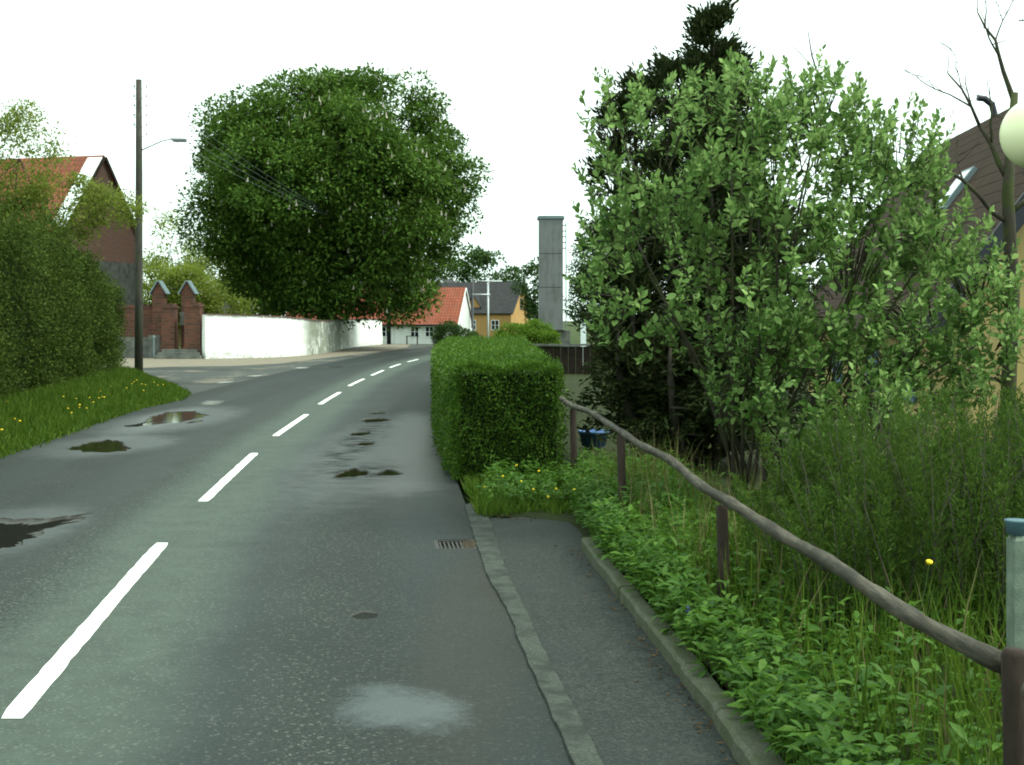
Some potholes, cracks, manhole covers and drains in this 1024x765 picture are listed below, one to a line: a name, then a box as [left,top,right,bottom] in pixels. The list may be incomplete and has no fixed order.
pothole [124,411,208,427]
pothole [351,610,381,619]
drain grate [434,539,477,549]
pothole [334,468,371,478]
pothole [0,512,96,550]
pothole [66,439,132,452]
